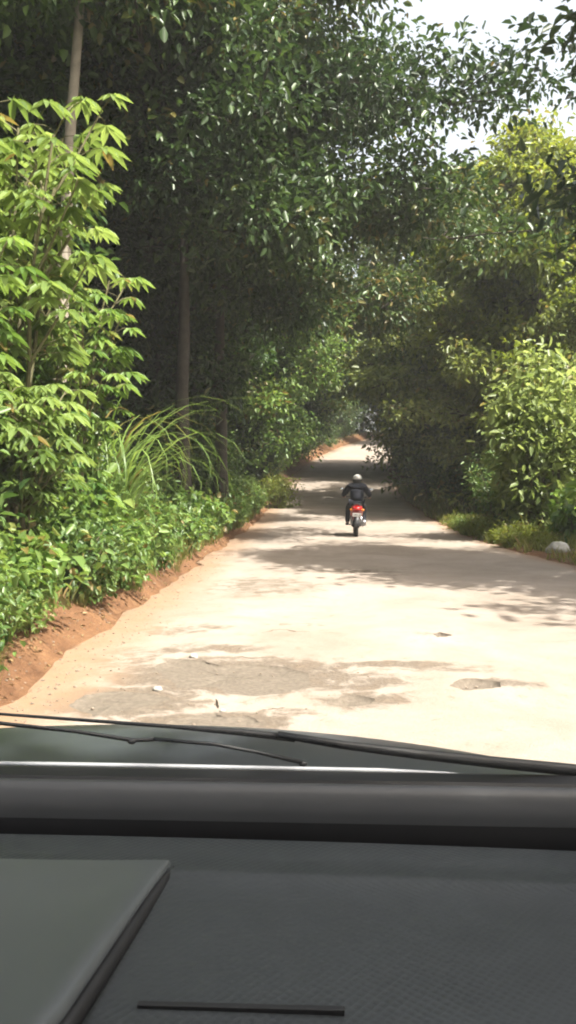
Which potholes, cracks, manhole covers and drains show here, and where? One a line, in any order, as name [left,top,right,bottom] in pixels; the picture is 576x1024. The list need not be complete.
pothole [450,678,501,691]
